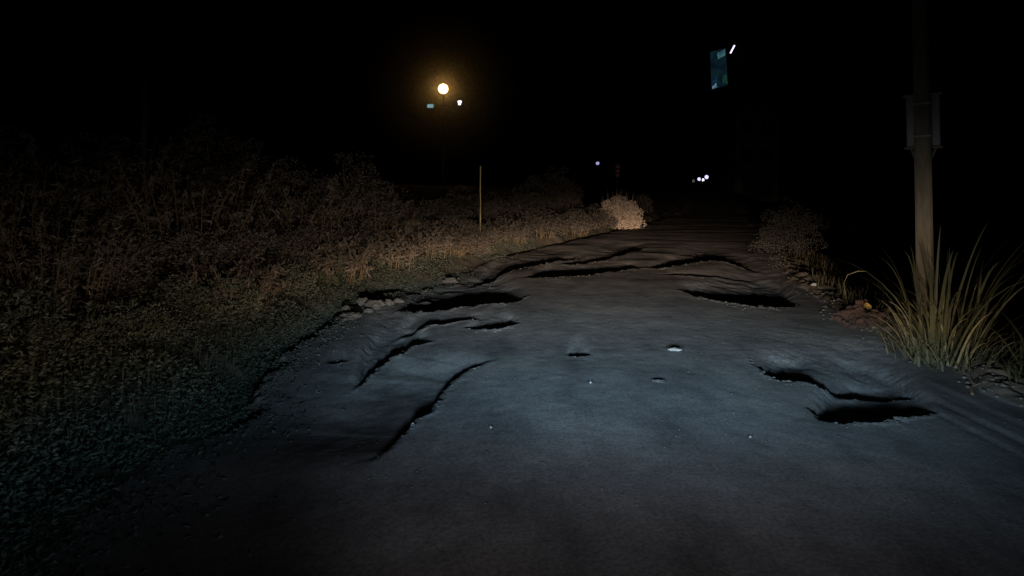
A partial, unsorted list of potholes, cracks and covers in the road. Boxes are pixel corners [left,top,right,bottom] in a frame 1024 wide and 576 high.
pothole [799,390,946,424]
pothole [391,282,533,314]
pothole [748,348,931,402]
pothole [671,282,806,307]
pothole [460,315,523,329]
